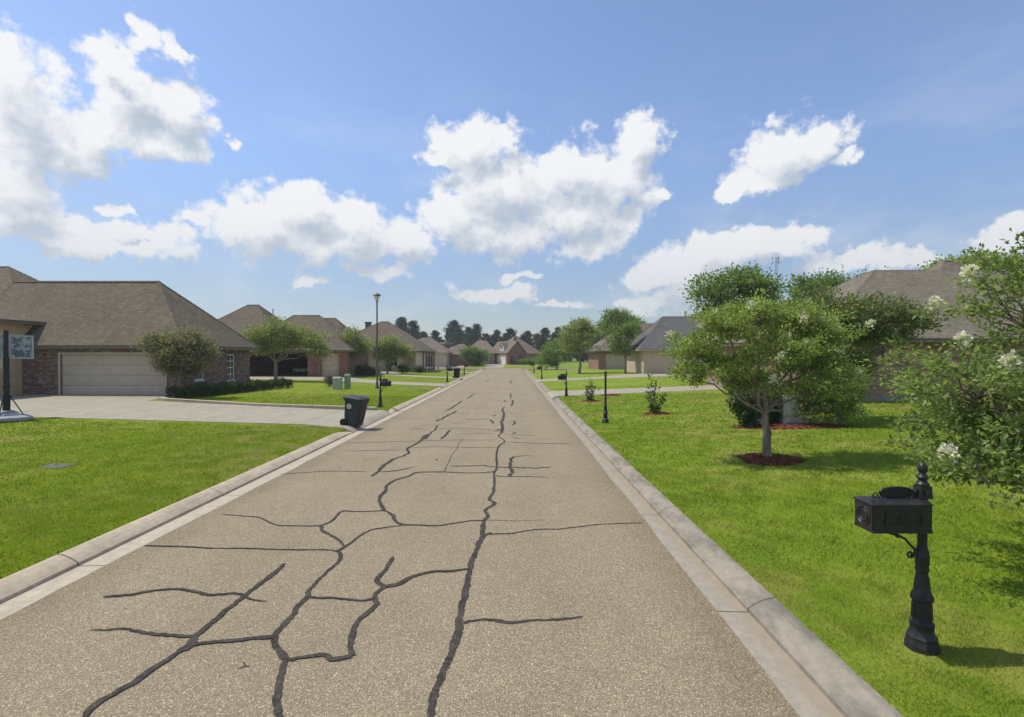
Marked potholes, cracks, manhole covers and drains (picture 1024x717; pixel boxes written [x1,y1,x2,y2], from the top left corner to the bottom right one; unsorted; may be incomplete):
crack [82,380,622,717]
